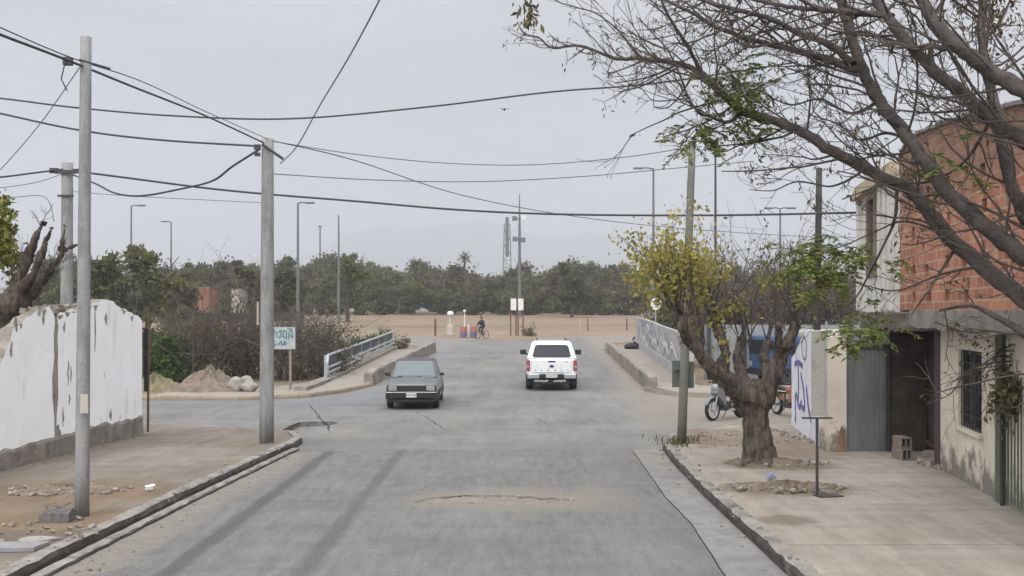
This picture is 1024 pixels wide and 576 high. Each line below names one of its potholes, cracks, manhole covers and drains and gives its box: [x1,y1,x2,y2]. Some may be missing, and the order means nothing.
pothole [282,421,337,433]
pothole [409,494,575,505]
crack [309,404,332,433]
